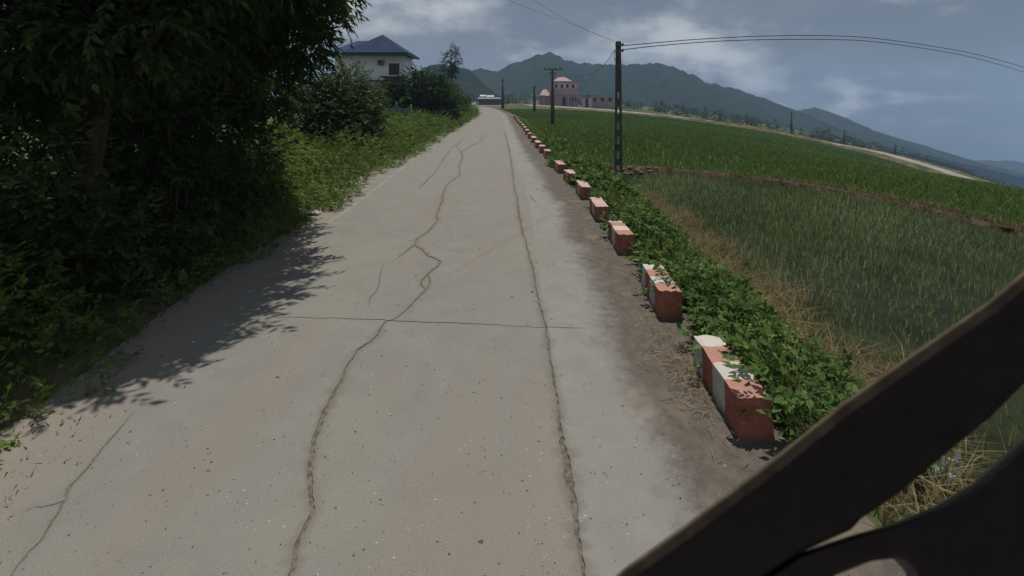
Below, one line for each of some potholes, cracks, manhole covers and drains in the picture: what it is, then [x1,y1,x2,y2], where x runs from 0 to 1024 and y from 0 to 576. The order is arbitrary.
crack [11,419,128,576]
crack [256,138,568,576]
